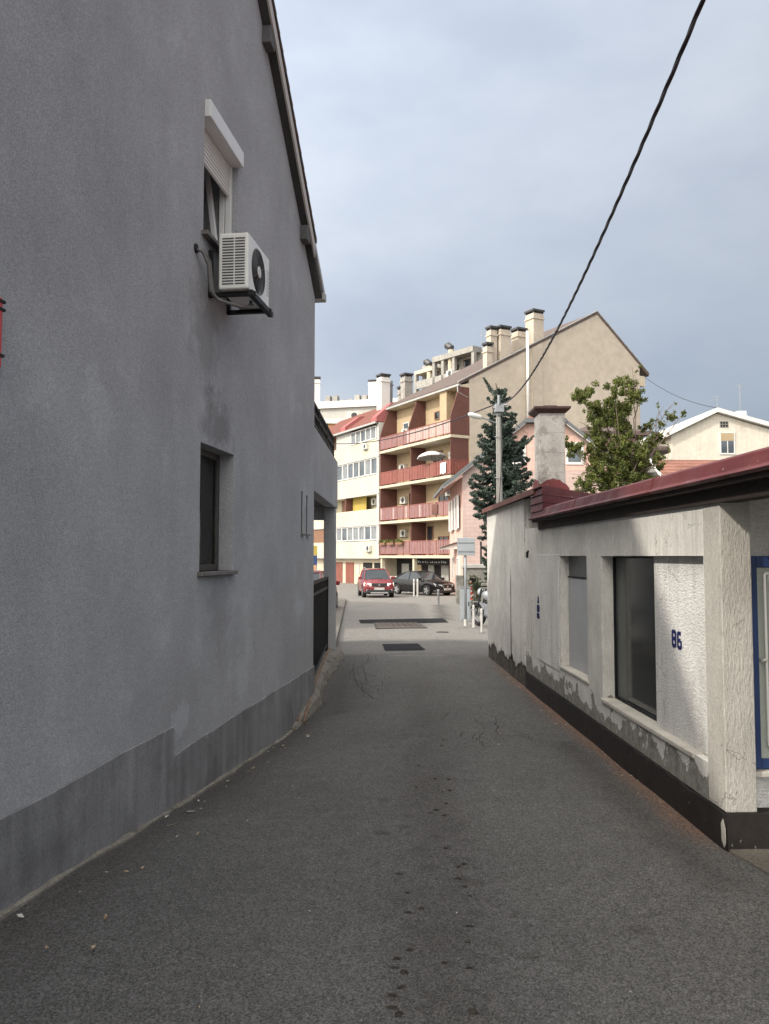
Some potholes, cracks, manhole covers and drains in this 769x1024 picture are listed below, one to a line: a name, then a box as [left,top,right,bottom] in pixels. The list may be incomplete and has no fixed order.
crack [440,712,536,748]
crack [350,652,383,699]
